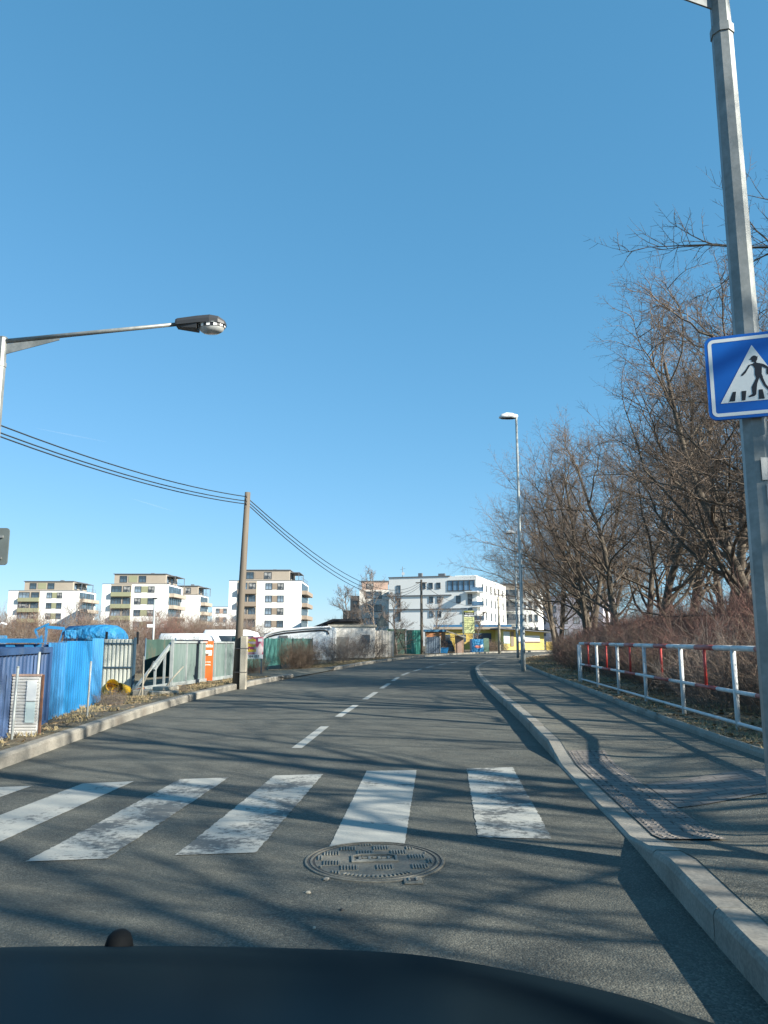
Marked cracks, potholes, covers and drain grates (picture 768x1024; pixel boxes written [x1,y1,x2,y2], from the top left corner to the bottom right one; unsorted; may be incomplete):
manhole cover [304,842,445,885]
